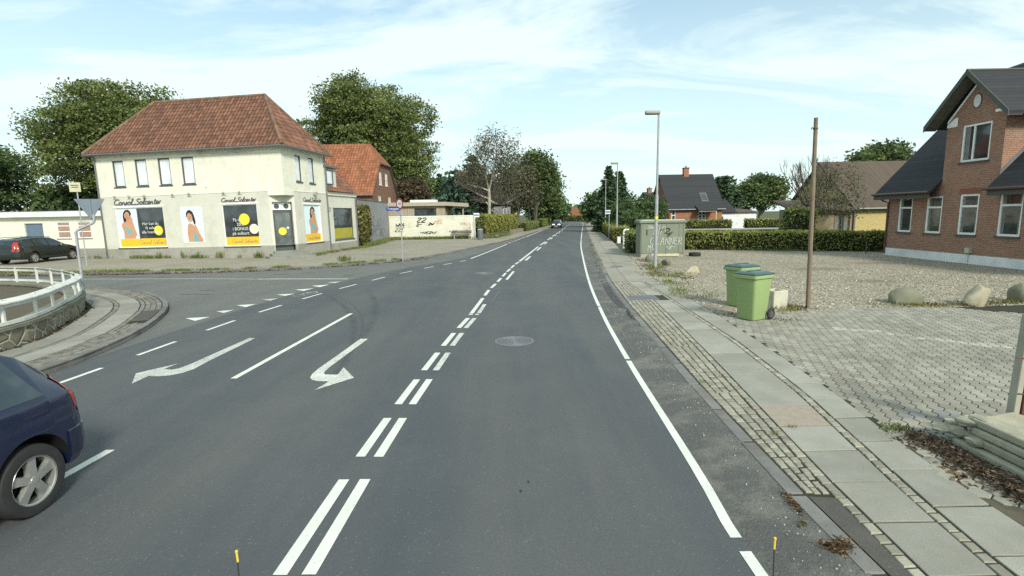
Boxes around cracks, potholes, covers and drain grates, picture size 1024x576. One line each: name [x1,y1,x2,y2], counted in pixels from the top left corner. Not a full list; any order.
manhole cover [495,336,534,346]
